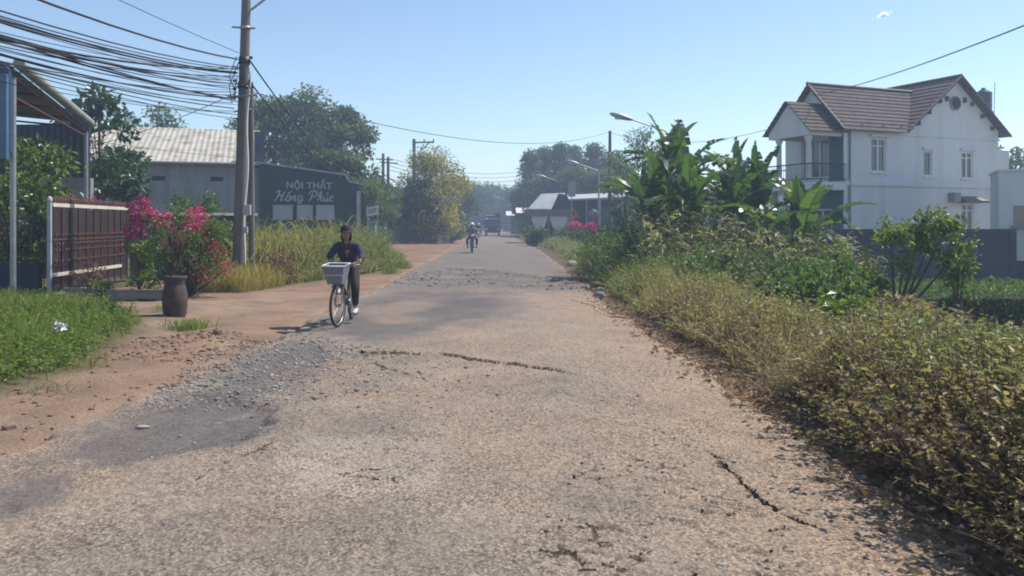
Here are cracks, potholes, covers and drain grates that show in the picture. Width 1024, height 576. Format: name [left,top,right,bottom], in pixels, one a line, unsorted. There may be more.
pothole [214,342,337,394]
crack [352,350,565,375]
crack [538,430,817,576]
pothole [390,268,576,291]
crack [339,448,405,484]
